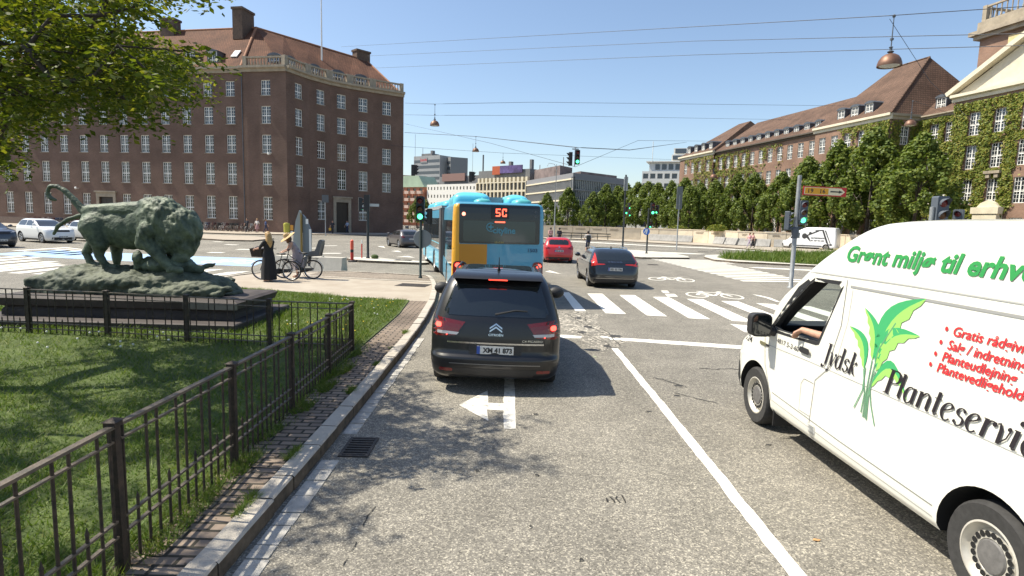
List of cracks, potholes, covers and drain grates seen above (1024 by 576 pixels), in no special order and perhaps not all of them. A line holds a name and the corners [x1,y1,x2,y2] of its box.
drain grate [337,437,379,457]
